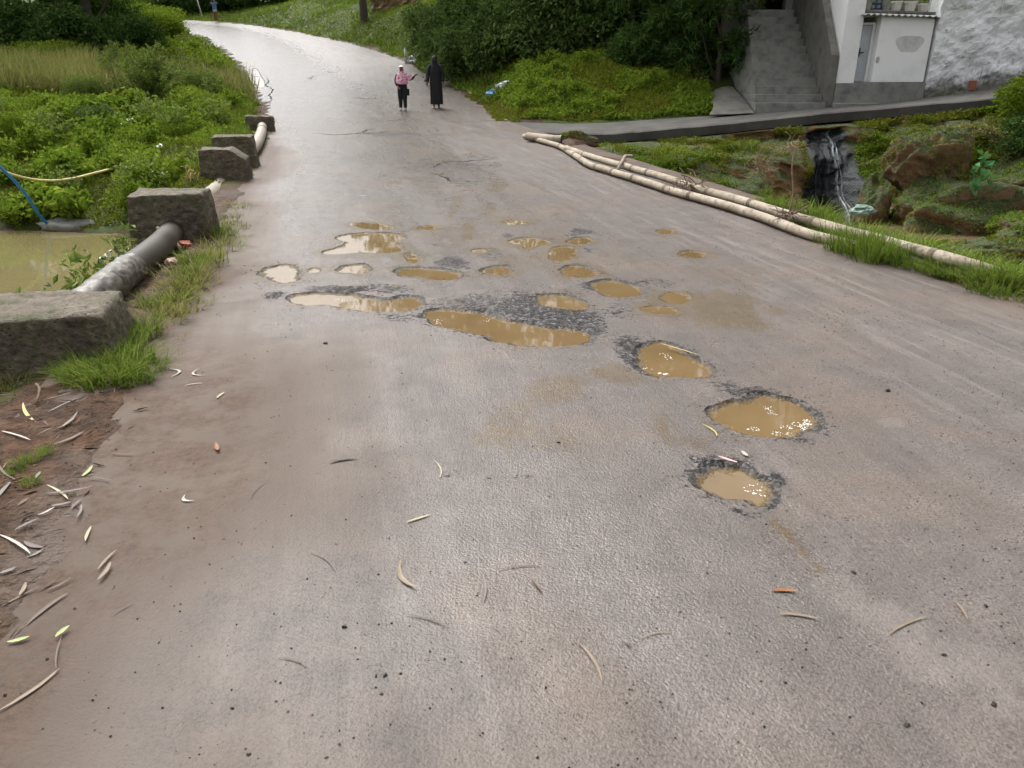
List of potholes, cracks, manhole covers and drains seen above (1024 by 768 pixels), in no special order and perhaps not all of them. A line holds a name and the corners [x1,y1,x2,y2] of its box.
pothole [391,266,464,280]
pothole [507,237,552,249]
pothole [417,307,598,347]
pothole [321,232,406,254]
pothole [688,459,782,508]
pothole [632,340,717,379]
pothole [586,278,646,298]
pothole [535,293,592,311]
crack [430,159,486,182]
pothole [334,263,373,274]
pothole [703,390,825,439]
pothole [547,245,578,262]
